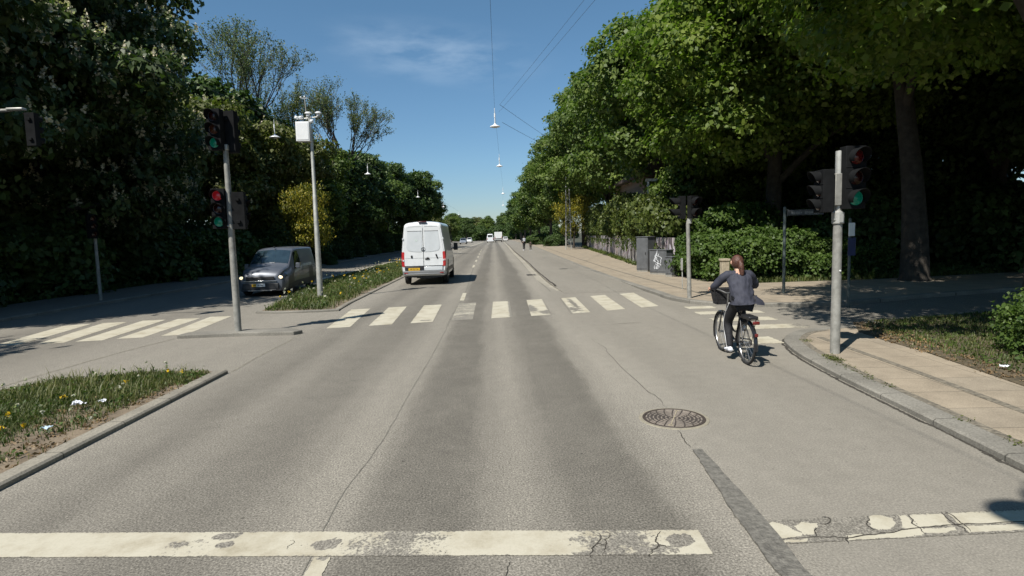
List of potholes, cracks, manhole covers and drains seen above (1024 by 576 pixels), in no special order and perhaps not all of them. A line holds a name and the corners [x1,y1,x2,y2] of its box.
crack [590,532,610,558]
manhole cover [639,408,710,430]
